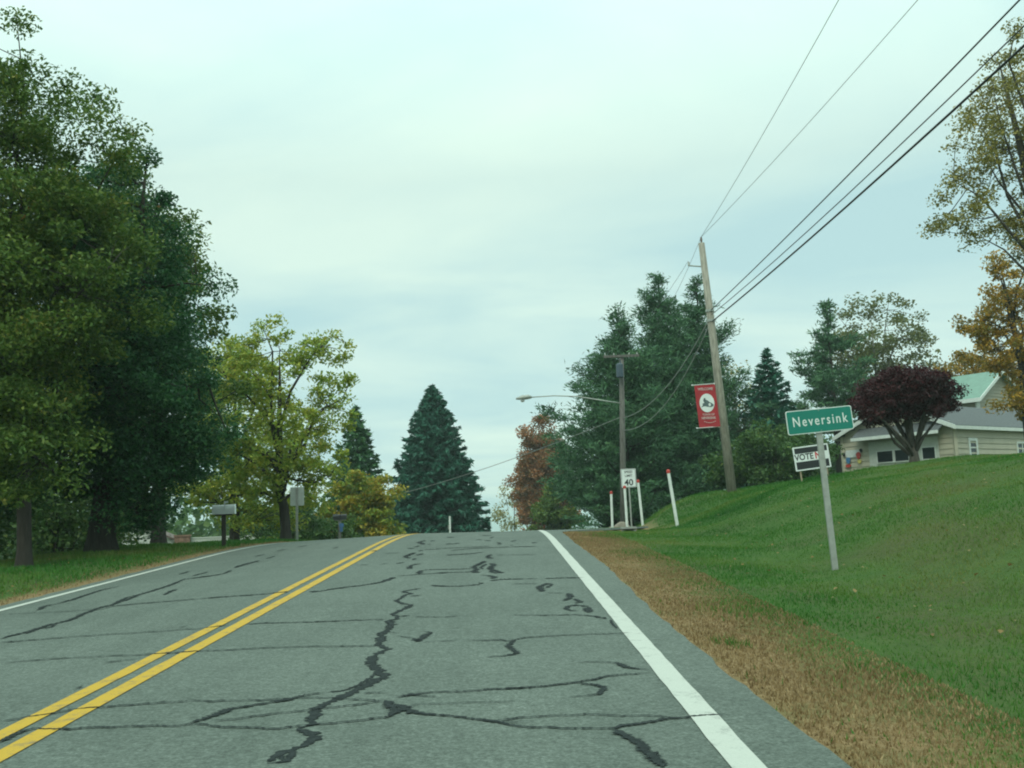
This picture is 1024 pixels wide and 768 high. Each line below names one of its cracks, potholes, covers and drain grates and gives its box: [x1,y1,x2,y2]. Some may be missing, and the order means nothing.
crack [309,549,426,592]
crack [0,625,223,643]
crack [10,591,288,614]
crack [3,645,372,663]
crack [250,614,632,657]
crack [0,672,647,742]
crack [451,546,535,555]
